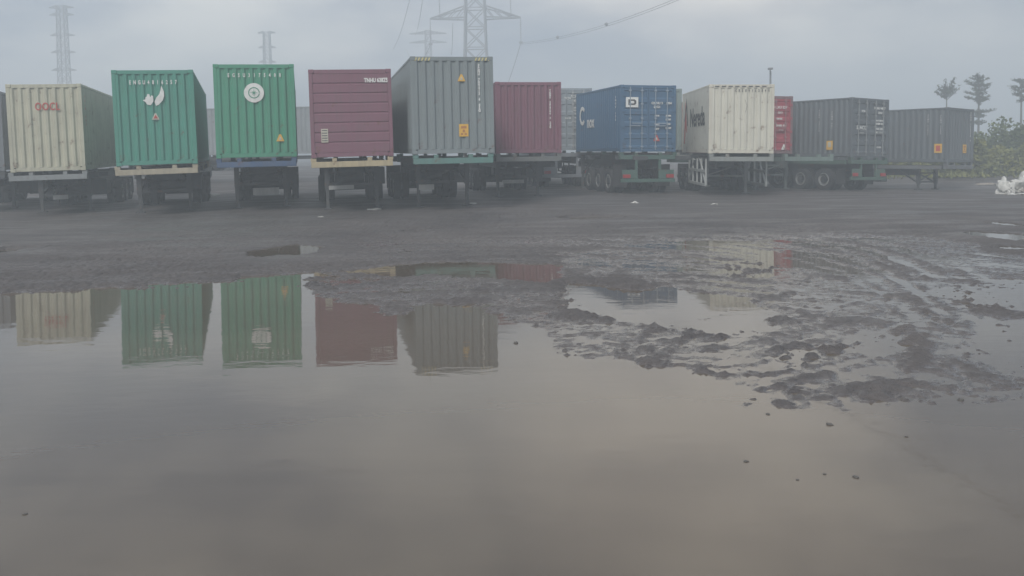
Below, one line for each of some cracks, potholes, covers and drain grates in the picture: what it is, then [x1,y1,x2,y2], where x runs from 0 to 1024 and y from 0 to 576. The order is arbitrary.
pothole [238,242,331,260]
